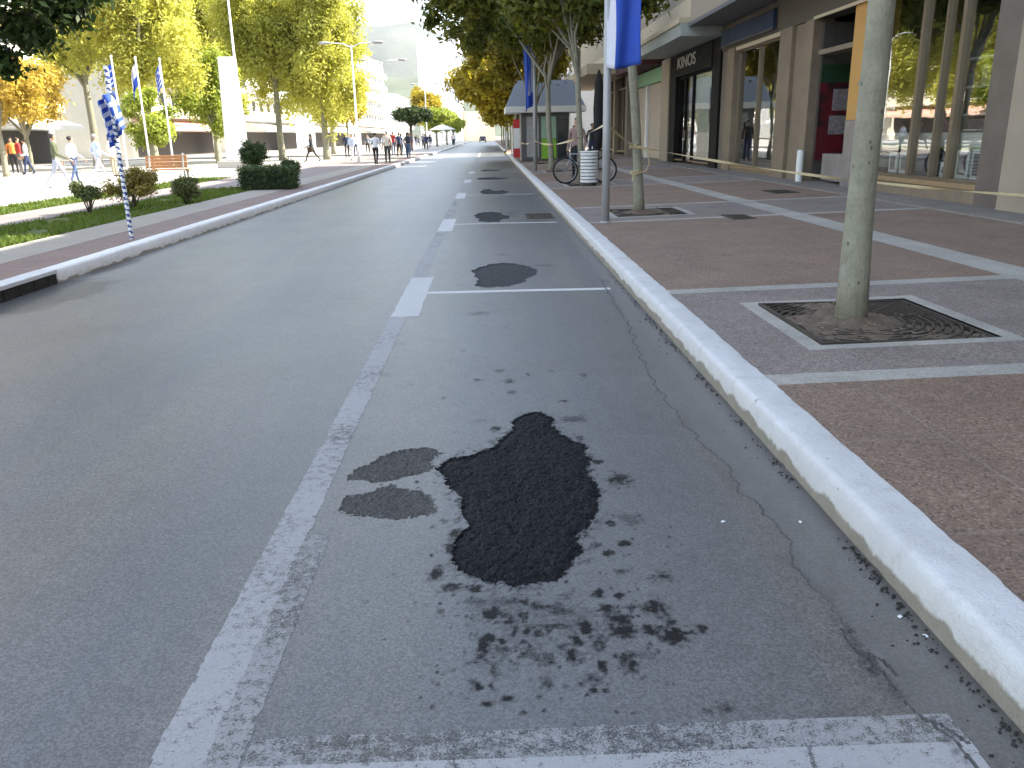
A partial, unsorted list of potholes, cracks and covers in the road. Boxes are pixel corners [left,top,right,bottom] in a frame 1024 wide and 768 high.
crack [601,280,979,768]
pothole [435,410,601,587]
pothole [471,263,538,288]
pothole [475,212,510,222]
